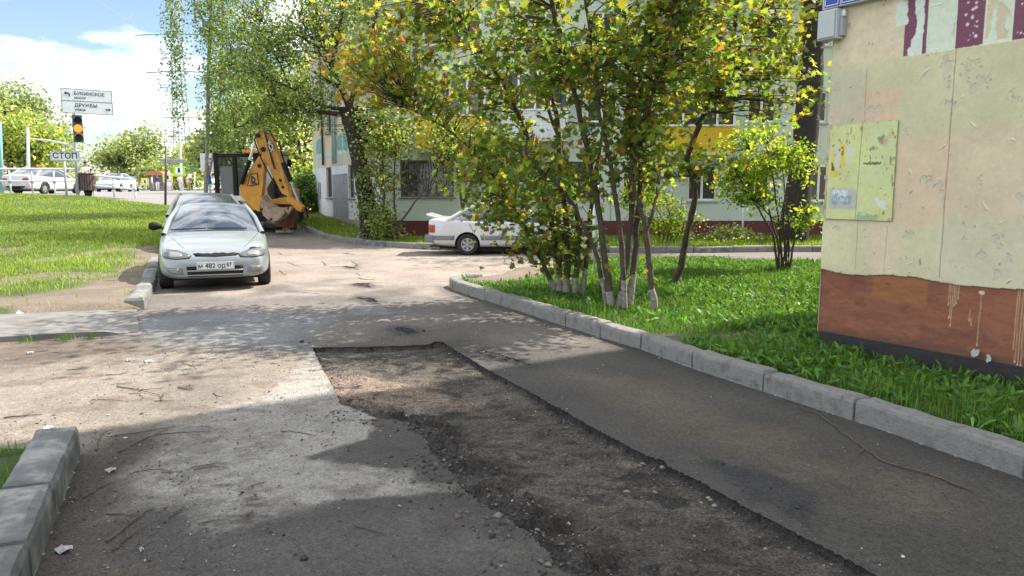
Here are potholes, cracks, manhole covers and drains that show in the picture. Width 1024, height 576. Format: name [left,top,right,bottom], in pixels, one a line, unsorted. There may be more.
pothole [312,341,876,576]
